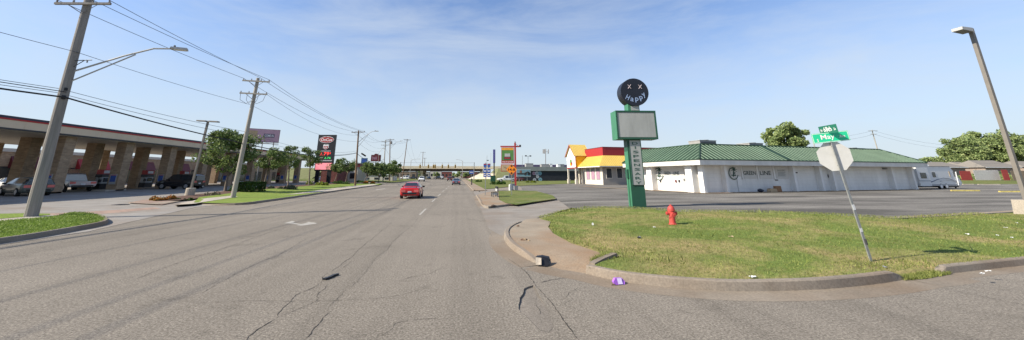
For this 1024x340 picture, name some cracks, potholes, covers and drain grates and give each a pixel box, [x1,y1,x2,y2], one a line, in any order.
crack [139,223,447,340]
